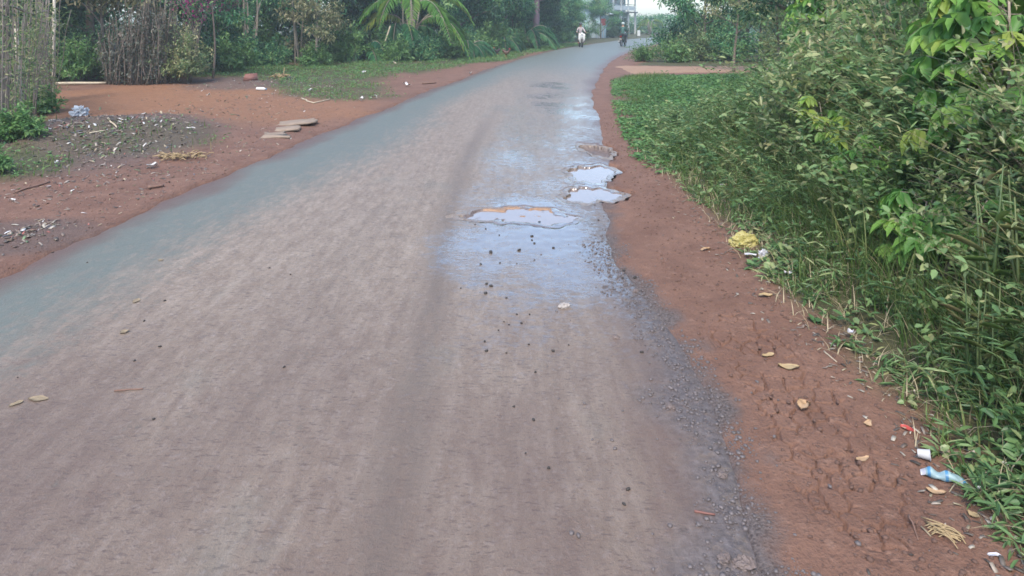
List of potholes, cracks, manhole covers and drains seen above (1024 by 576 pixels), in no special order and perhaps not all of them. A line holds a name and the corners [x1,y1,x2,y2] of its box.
pothole [557,184,631,206]
pothole [445,206,583,228]
pothole [576,143,617,160]
pothole [561,163,623,187]
